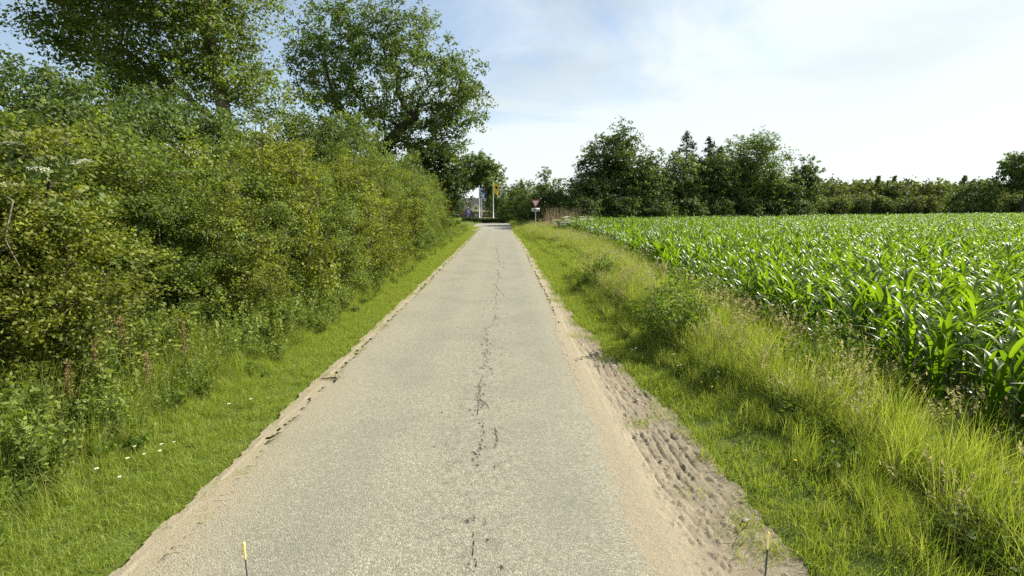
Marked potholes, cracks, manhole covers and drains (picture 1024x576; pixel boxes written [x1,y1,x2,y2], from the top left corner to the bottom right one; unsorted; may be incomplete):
crack [460,247,505,468]
crack [469,532,477,573]
